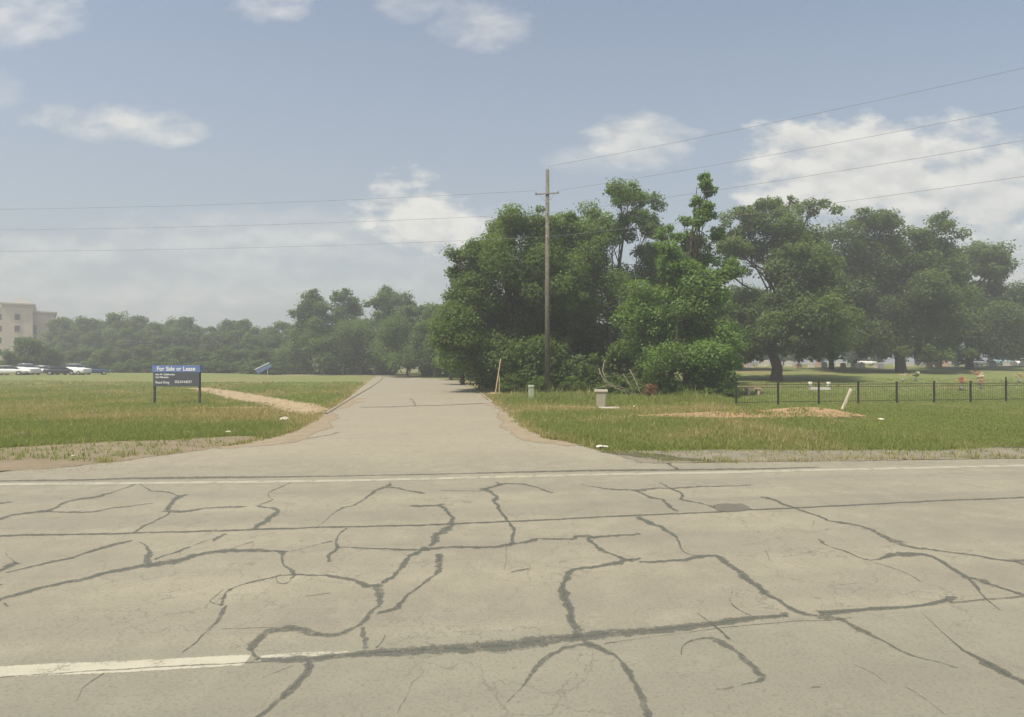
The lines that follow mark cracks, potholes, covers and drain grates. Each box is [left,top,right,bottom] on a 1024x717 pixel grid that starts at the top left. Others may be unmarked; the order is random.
crack [0,463,1024,717]
